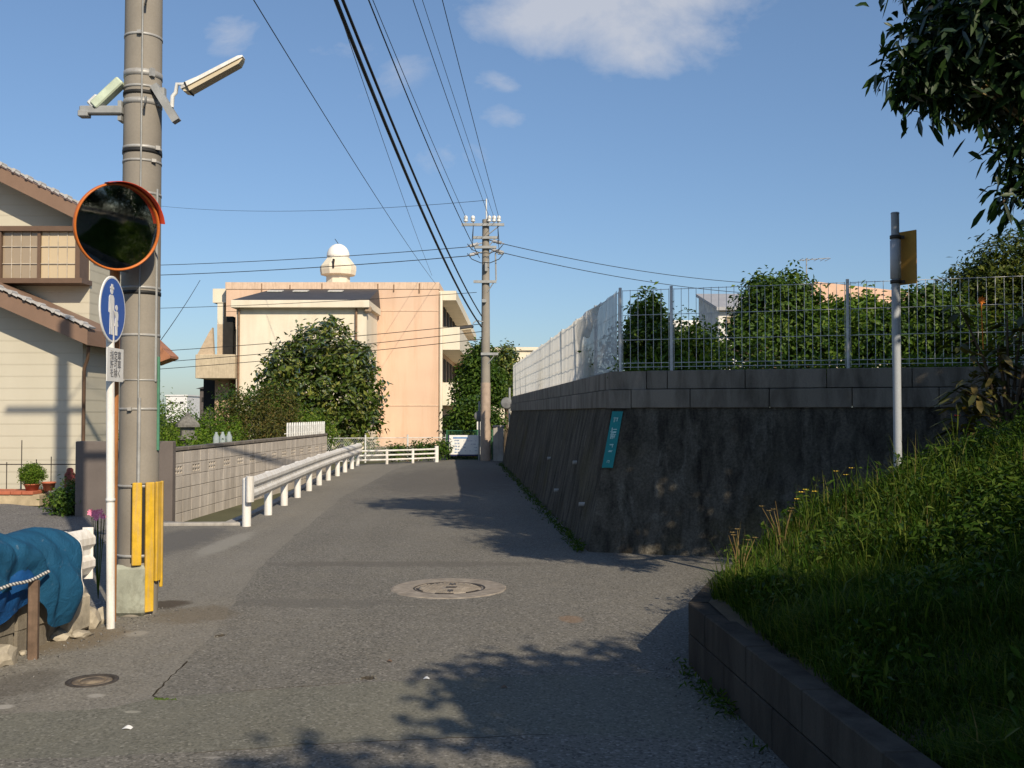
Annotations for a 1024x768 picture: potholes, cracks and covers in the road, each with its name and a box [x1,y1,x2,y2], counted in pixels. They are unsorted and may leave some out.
manhole cover [65,674,119,688]
manhole cover [390,578,506,599]
